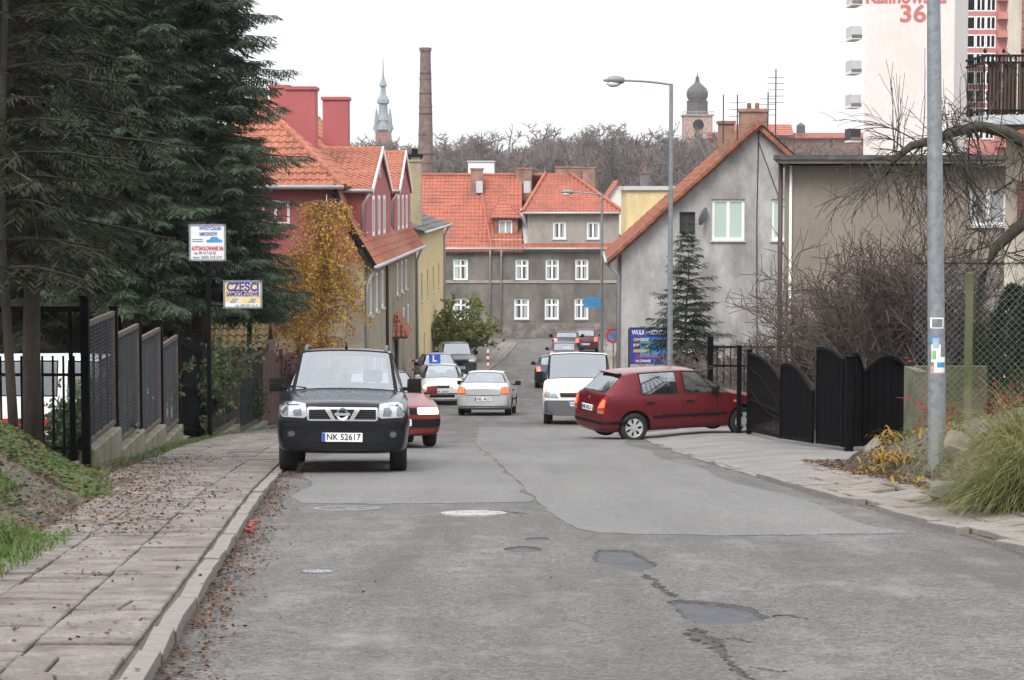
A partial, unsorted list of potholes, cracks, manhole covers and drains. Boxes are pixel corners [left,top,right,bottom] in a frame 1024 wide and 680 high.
crack [682,614,810,680]
pothole [592,550,658,572]
crack [641,574,679,598]
pothole [667,599,771,625]
